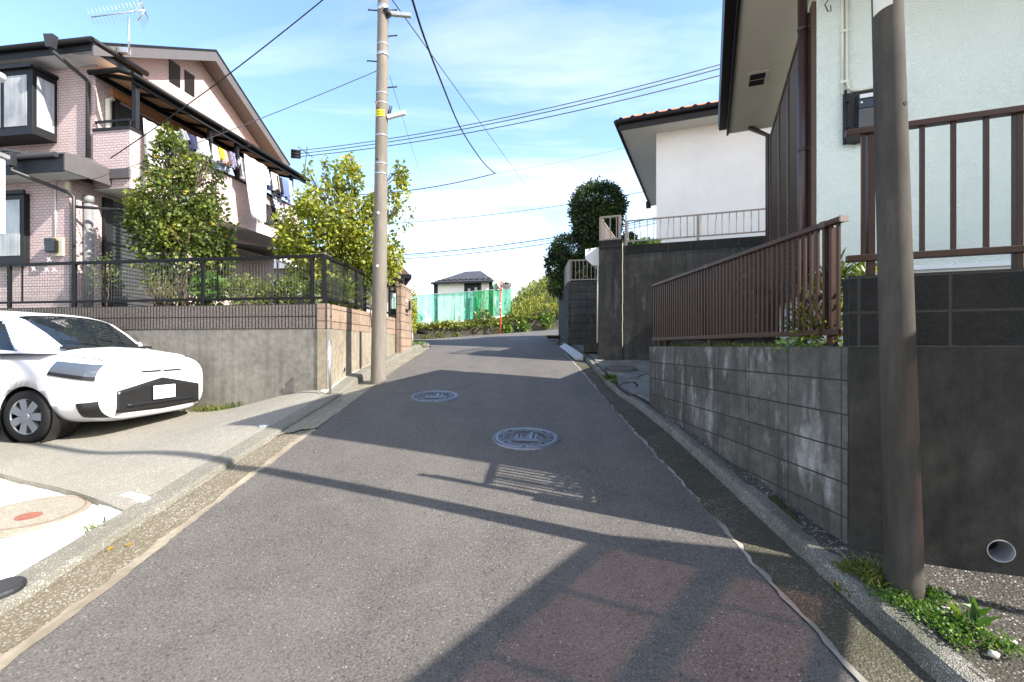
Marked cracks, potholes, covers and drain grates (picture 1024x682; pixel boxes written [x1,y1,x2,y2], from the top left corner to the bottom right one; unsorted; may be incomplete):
manhole cover [410,390,459,402]
manhole cover [492,427,560,450]
manhole cover [0,495,92,539]
